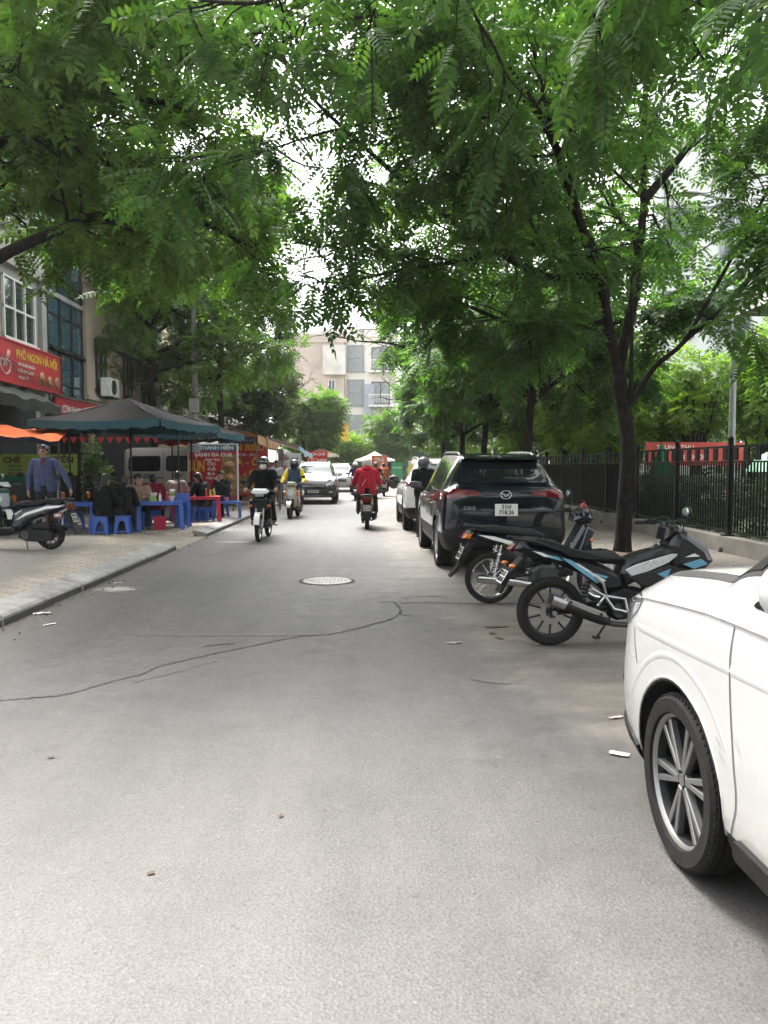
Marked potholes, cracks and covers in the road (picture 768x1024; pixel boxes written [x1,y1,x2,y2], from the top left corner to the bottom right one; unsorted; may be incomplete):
manhole cover [299,576,356,585]
crack [0,596,543,701]
